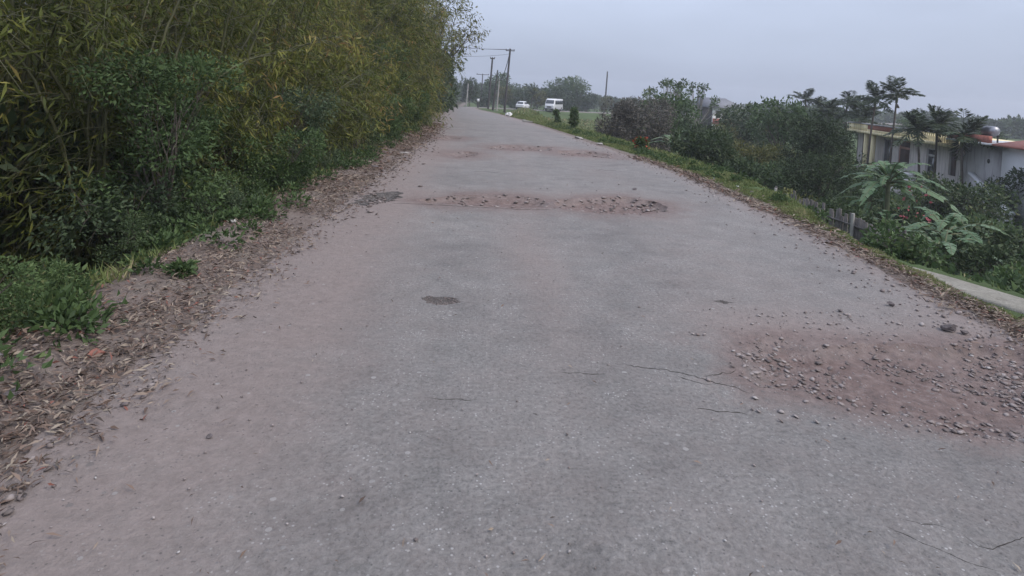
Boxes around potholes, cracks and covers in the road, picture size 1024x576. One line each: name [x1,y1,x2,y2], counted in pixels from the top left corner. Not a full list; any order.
crack [886,520,1023,571]
pothole [732,333,1024,443]
crack [631,365,745,392]
pothole [558,150,611,158]
pothole [554,196,668,215]
pothole [418,194,549,208]
